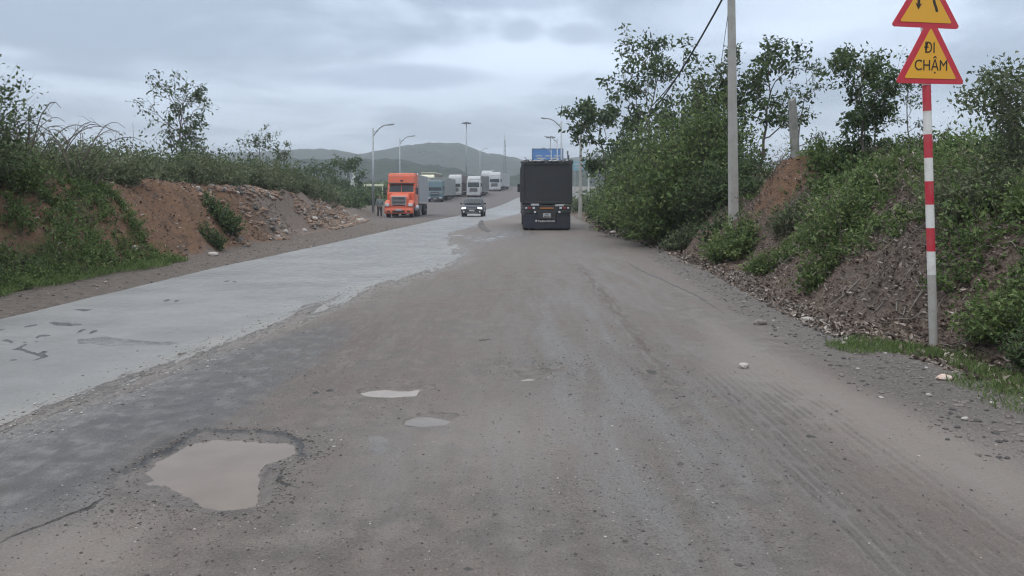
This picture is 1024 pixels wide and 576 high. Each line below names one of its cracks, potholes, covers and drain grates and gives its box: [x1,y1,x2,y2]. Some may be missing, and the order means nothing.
pothole [356,379,436,398]
crack [0,493,110,543]
crack [628,262,723,313]
pothole [114,429,307,512]
pothole [510,365,568,381]
pothole [402,411,460,427]
